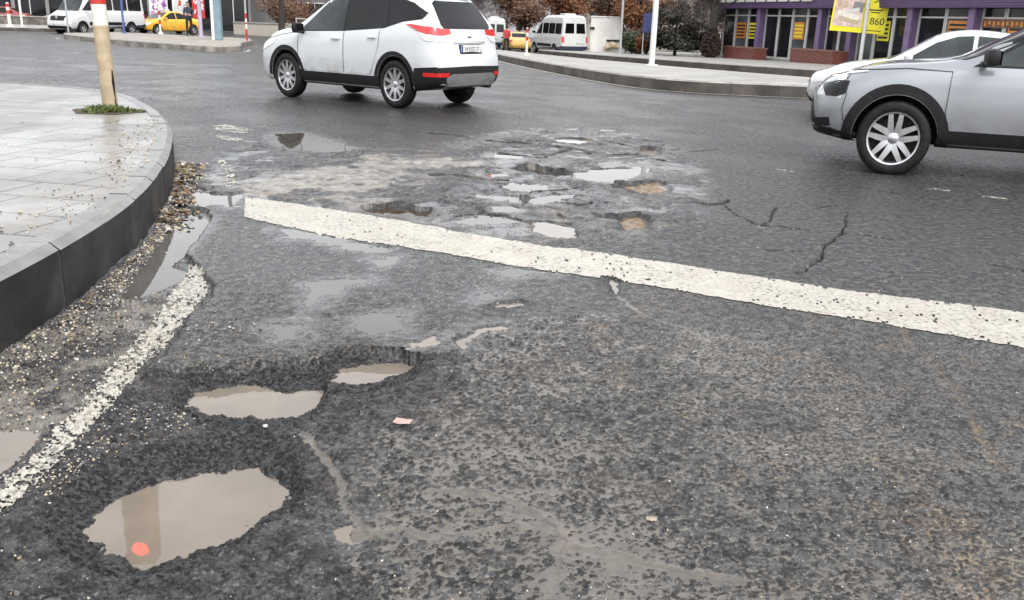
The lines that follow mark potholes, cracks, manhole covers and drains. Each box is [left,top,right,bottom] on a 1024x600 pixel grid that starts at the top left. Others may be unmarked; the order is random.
crack [695,186,949,274]
pothole [46,427,307,582]
pothole [632,145,665,157]
pothole [508,162,573,177]
pothole [173,357,329,429]
pothole [592,211,654,231]
pothole [322,345,425,394]
pothole [529,220,579,239]
pothole [353,200,445,221]
pothole [612,179,675,195]
crack [616,297,713,343]
